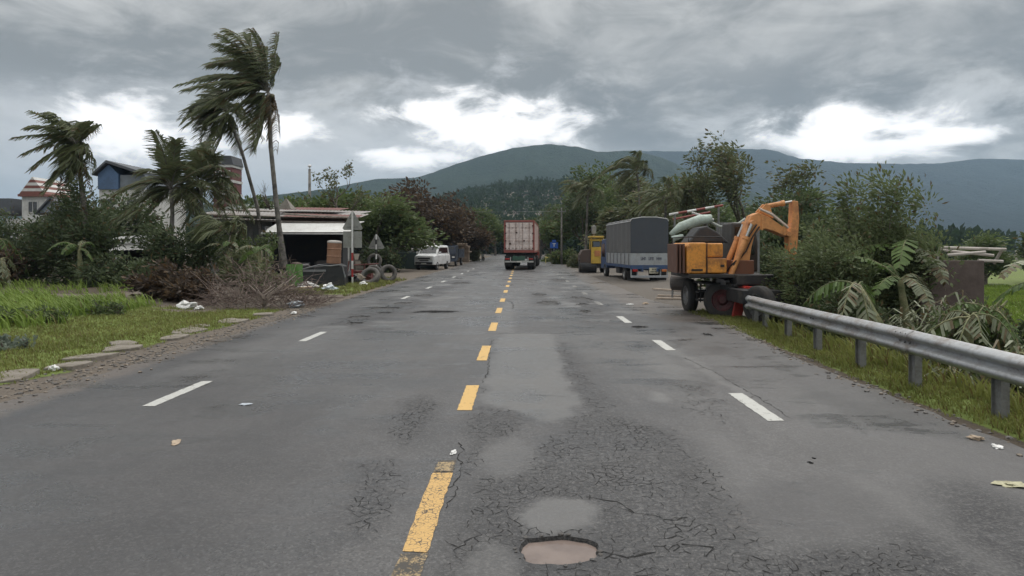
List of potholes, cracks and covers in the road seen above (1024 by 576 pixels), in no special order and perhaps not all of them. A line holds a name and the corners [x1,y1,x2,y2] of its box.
pothole [513,532,603,567]
crack [348,457,409,532]
crack [388,398,437,444]
crack [445,340,773,576]
